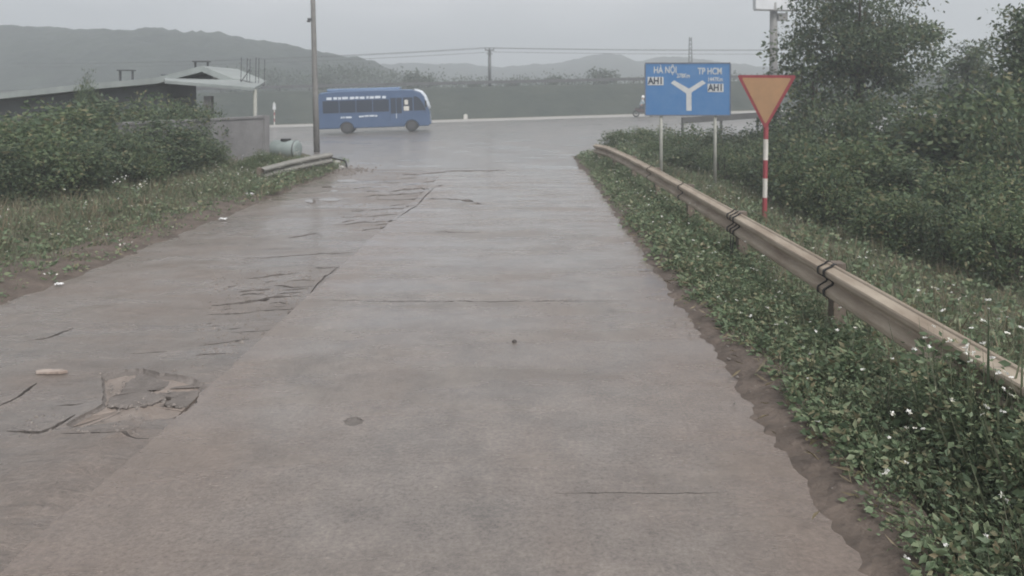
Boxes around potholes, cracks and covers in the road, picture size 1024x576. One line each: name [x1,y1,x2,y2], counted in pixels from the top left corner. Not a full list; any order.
crack [195,170,506,356]
pothole [66,368,204,428]
crack [33,328,73,340]
crack [0,383,149,439]
